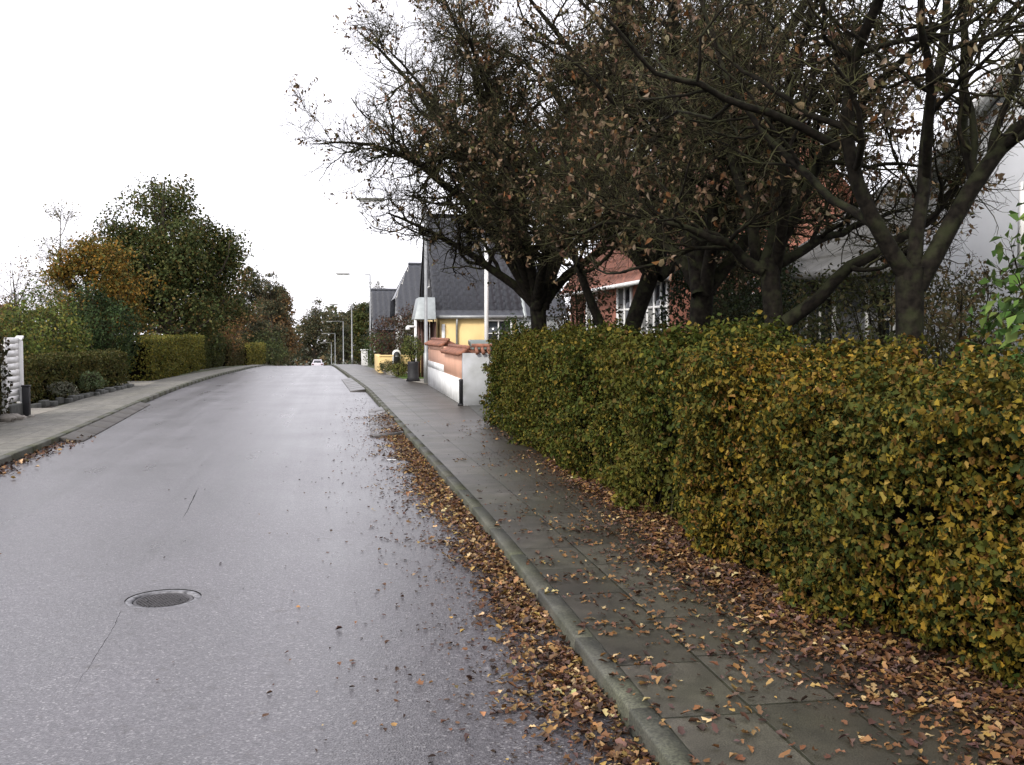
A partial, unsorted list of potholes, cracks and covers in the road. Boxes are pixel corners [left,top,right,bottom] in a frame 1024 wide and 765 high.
manhole cover [125,590,201,608]
